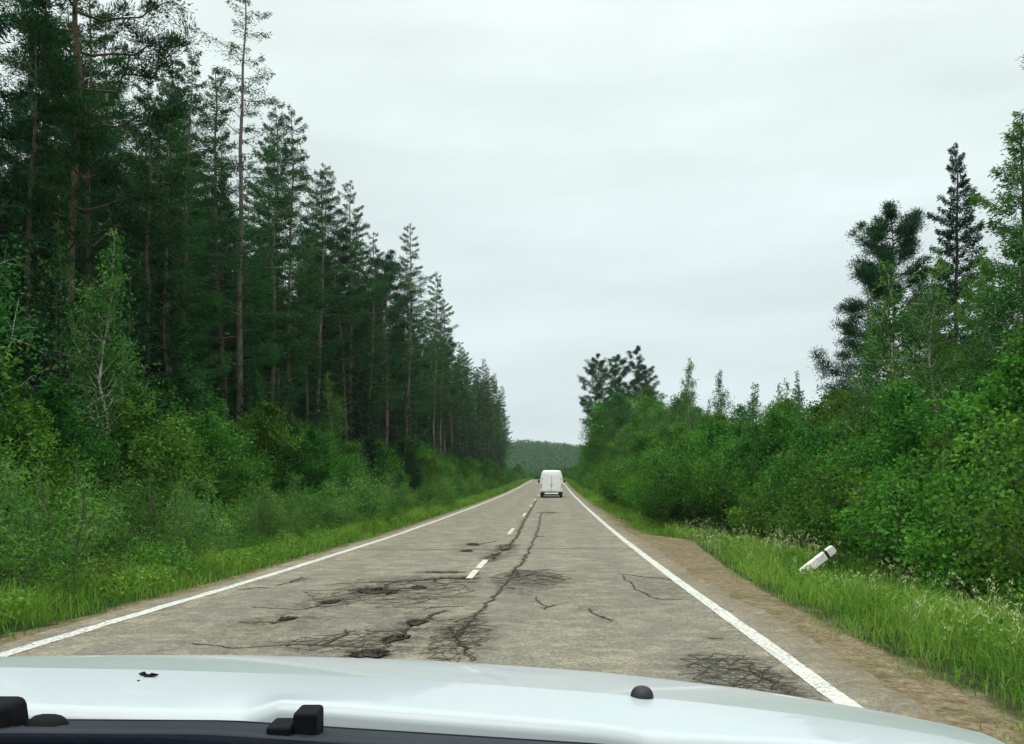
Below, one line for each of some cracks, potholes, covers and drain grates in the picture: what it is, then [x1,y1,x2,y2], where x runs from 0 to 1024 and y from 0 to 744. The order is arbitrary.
pothole [381,633,411,644]
crack [425,536,628,550]
pothole [347,648,391,659]
pothole [357,587,399,595]
crack [678,637,797,693]
crack [192,569,573,662]
crack [619,573,680,600]
